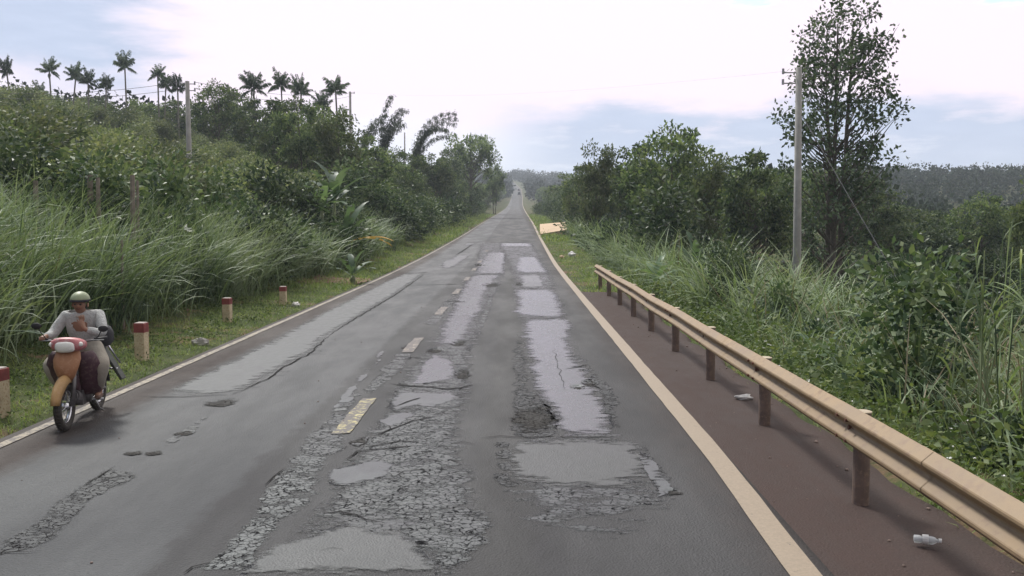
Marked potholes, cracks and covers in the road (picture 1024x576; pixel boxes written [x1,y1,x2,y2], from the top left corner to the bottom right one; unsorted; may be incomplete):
crack [154,282,620,573]
pothole [511,406,559,432]
crack [0,466,135,555]
